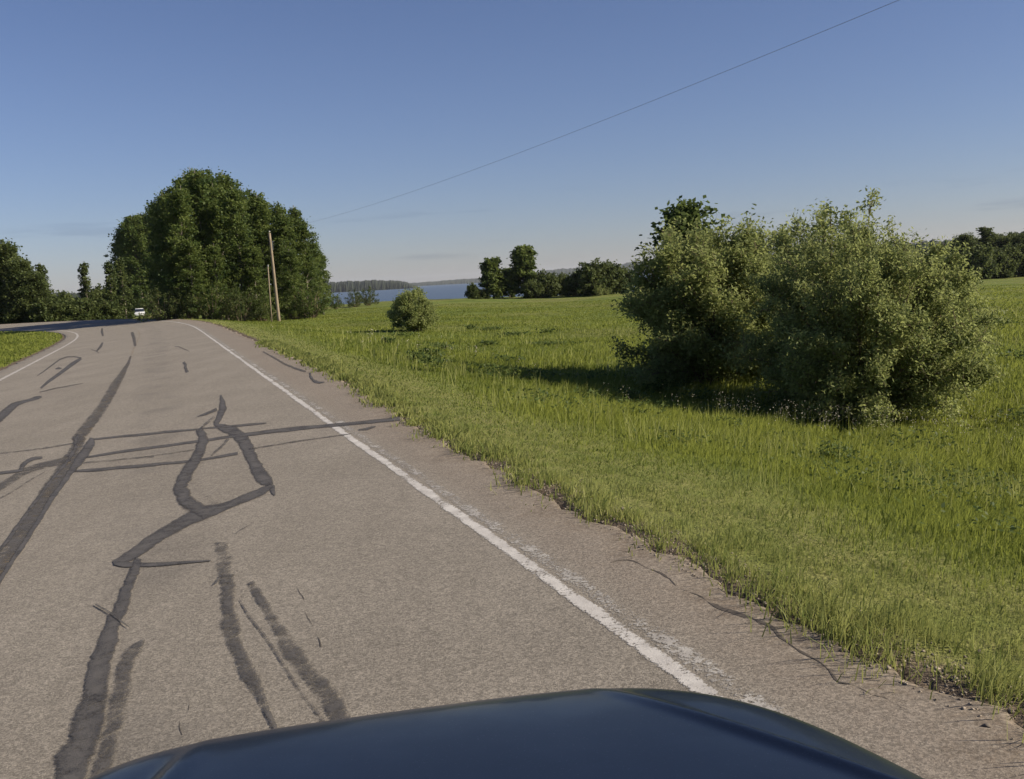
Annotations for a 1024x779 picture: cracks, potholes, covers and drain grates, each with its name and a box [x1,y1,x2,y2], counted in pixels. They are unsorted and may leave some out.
crack [613,559,903,708]
